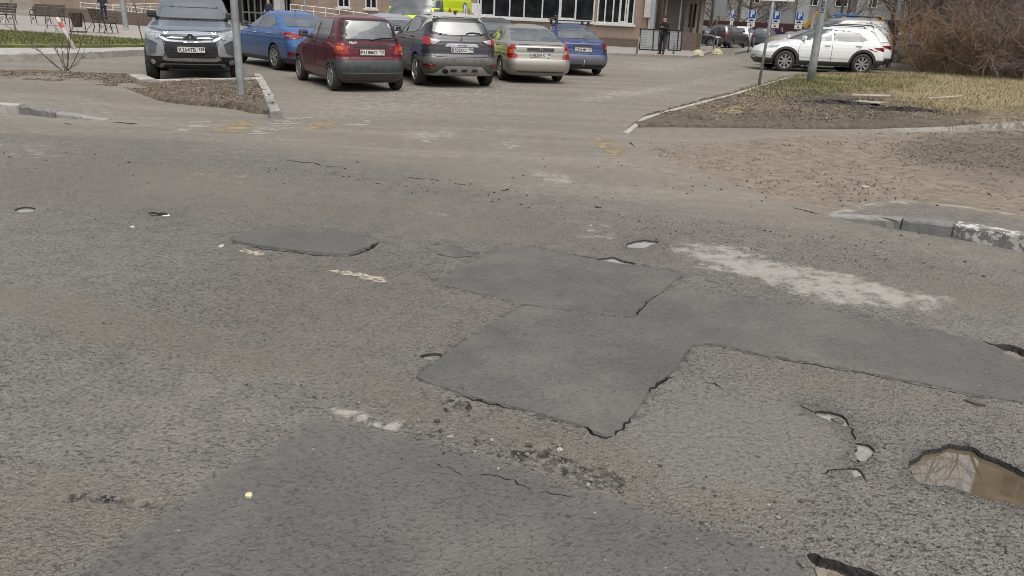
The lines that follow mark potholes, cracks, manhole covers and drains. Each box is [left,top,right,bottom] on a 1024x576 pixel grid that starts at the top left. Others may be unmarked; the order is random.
pothole [505,448,631,494]
pothole [799,404,856,440]
pothole [62,491,163,512]
pothole [820,459,868,482]
pothole [791,544,899,576]
pothole [845,440,881,467]
crack [480,474,572,498]
pothole [622,239,660,249]
pothole [567,254,636,265]
pothole [892,441,1024,509]
